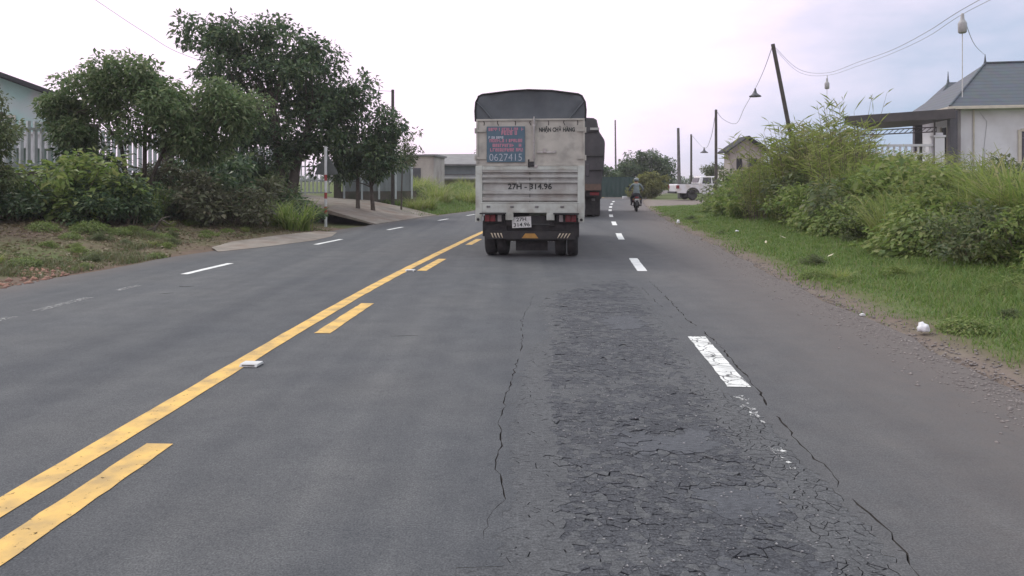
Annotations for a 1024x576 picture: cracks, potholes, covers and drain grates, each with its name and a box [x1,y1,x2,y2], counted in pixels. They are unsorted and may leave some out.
crack [455,280,919,576]
